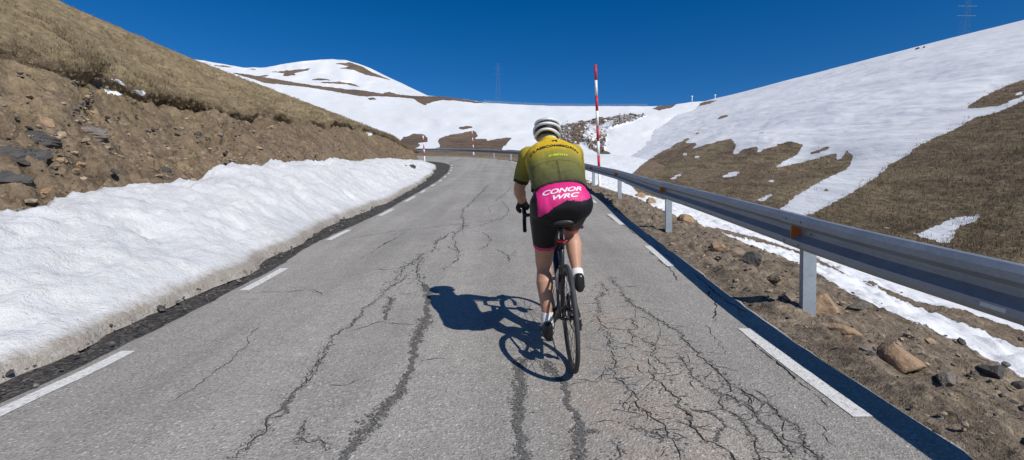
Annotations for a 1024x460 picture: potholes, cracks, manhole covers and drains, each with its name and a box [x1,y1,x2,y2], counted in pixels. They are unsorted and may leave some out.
crack [507,277,839,460]
crack [608,216,751,354]
crack [227,187,524,460]
